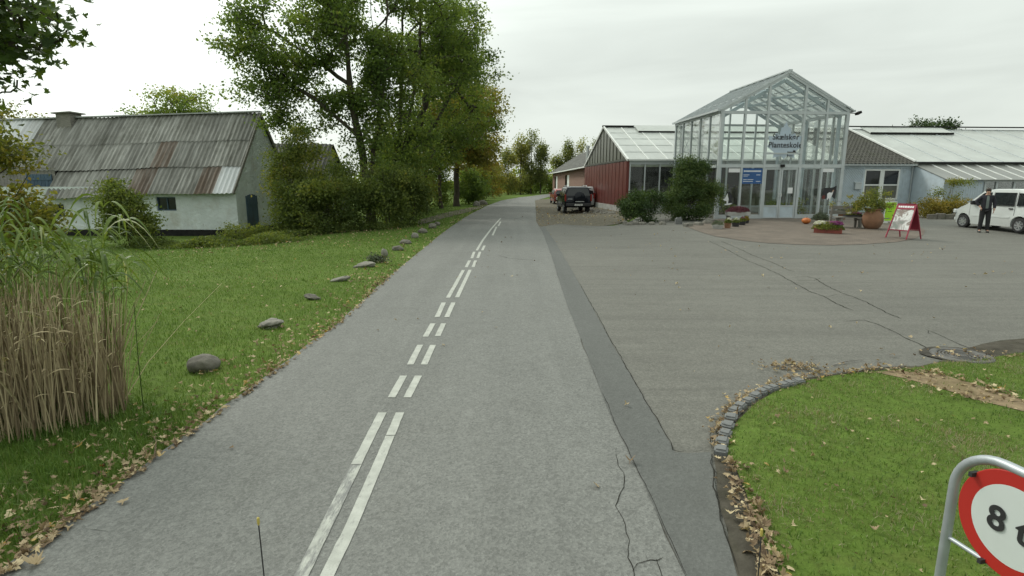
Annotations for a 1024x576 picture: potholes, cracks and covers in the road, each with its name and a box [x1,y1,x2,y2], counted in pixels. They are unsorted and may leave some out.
crack [710,241,969,348]
manhole cover [929,347,996,364]
crack [615,456,663,576]
